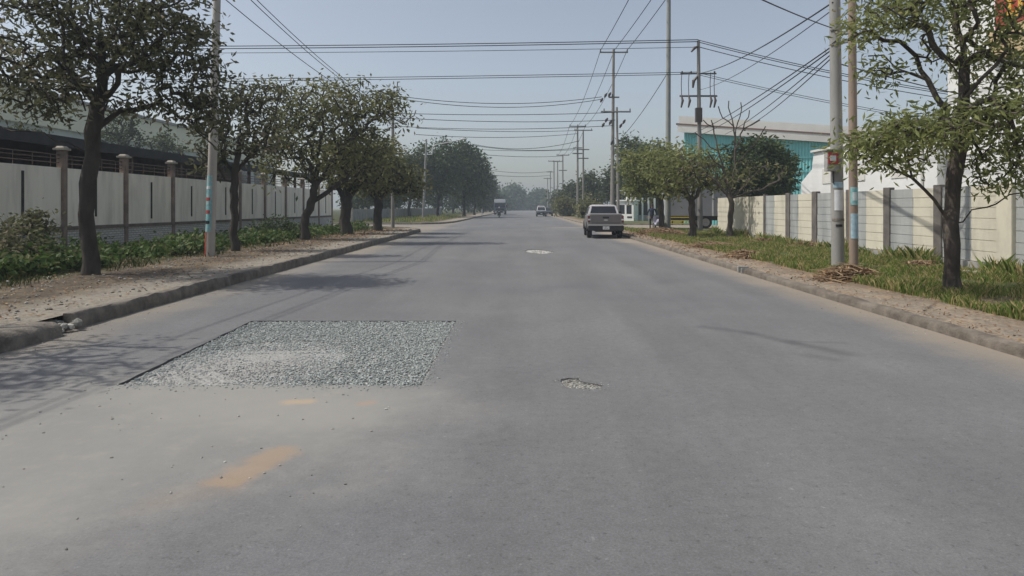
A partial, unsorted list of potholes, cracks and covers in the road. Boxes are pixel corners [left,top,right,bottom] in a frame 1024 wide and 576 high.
pothole [552,376,609,391]
